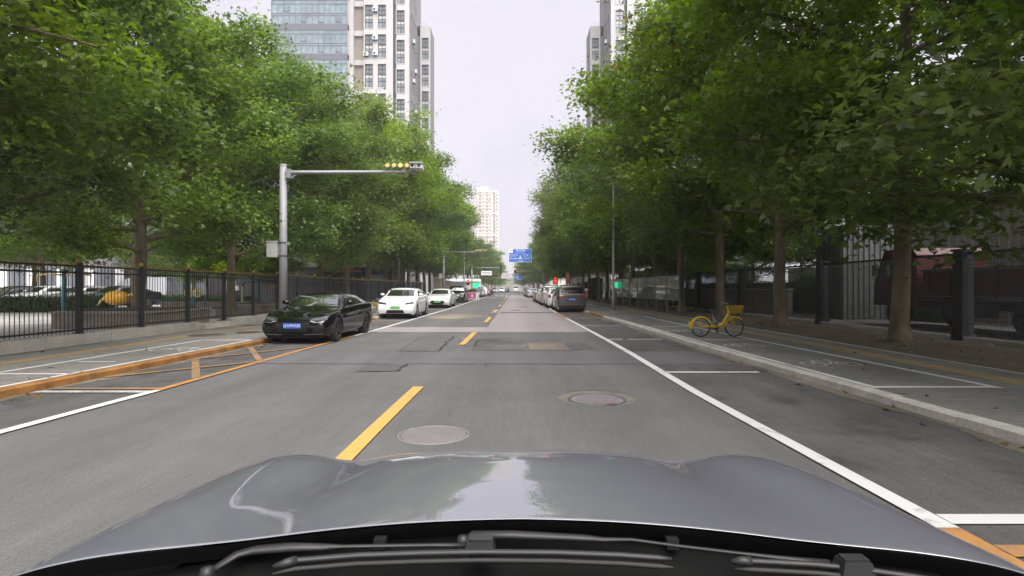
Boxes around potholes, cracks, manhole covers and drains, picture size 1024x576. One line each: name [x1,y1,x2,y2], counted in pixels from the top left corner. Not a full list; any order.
manhole cover [558,391,636,406]
manhole cover [397,425,470,445]
